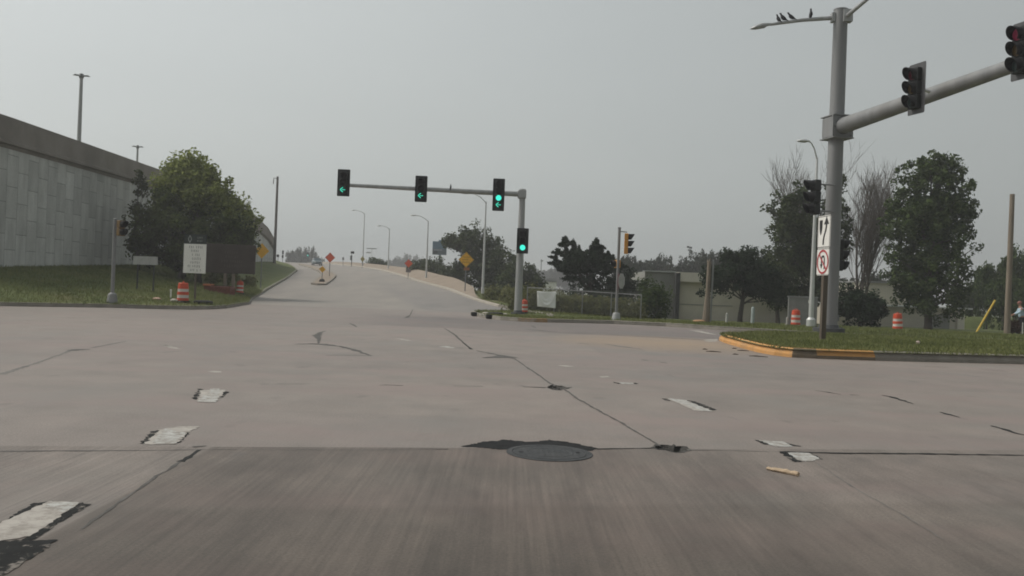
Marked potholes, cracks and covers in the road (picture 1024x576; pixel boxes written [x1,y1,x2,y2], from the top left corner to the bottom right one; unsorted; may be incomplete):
manhole cover [506,445,593,462]
pothole [652,444,691,453]
